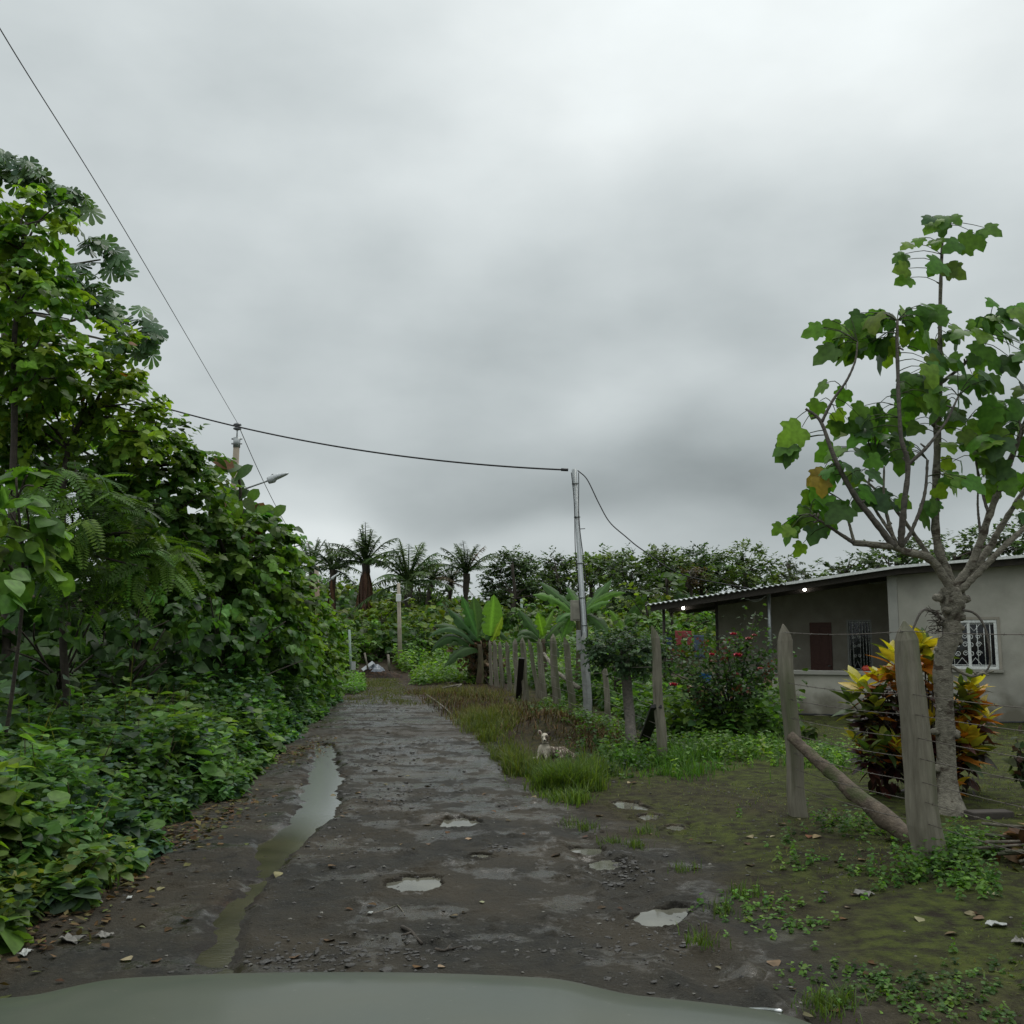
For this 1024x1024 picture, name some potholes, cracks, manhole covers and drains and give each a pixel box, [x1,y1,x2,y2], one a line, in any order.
pothole [558,843,614,862]
pothole [578,853,636,875]
pothole [462,851,499,861]
pothole [630,811,669,824]
pothole [609,899,719,936]
pothole [369,871,457,897]
pothole [601,798,665,815]
pothole [429,813,493,831]
